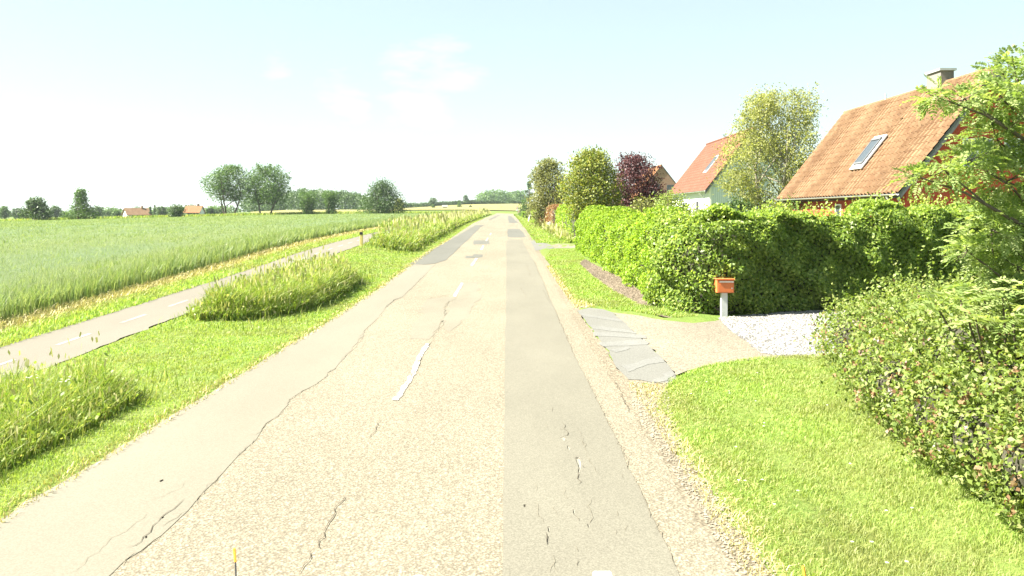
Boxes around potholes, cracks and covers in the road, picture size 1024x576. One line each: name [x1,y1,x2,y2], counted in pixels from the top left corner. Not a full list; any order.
crack [300,497,345,571]
crack [74,481,185,571]
crack [536,406,596,571]
